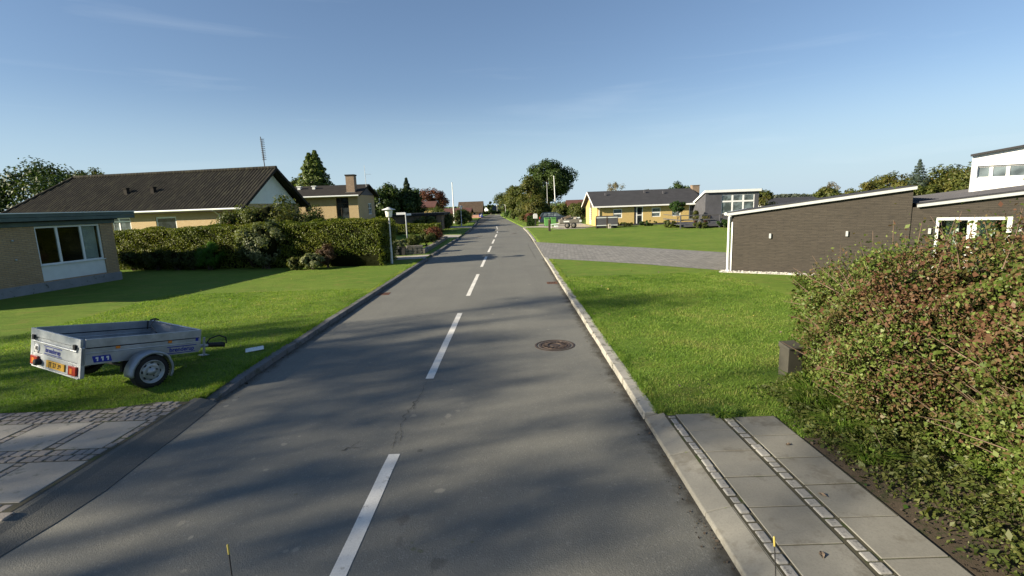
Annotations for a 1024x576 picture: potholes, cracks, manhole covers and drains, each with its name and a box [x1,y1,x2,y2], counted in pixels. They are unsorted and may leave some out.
manhole cover [535,340,575,351]
